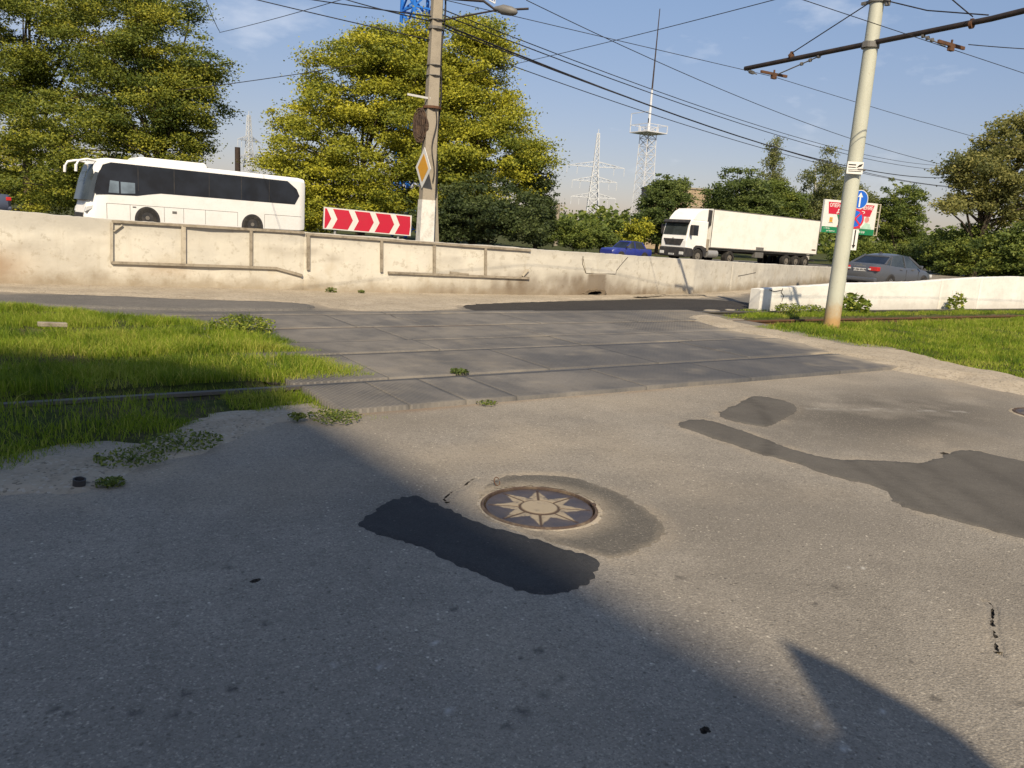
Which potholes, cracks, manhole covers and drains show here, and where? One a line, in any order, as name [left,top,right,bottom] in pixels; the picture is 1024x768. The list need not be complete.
crack [983,602,1003,653]
manhole cover [477,486,604,532]
manhole cover [1008,407,1024,417]
